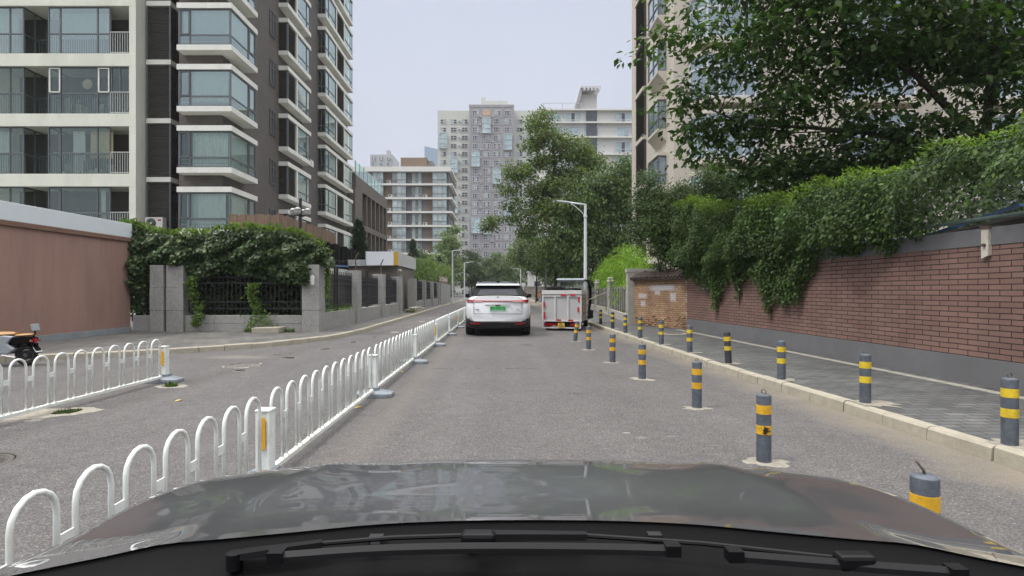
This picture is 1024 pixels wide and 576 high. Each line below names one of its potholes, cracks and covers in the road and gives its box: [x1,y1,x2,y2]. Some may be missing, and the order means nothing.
manhole cover [0,452,20,466]
